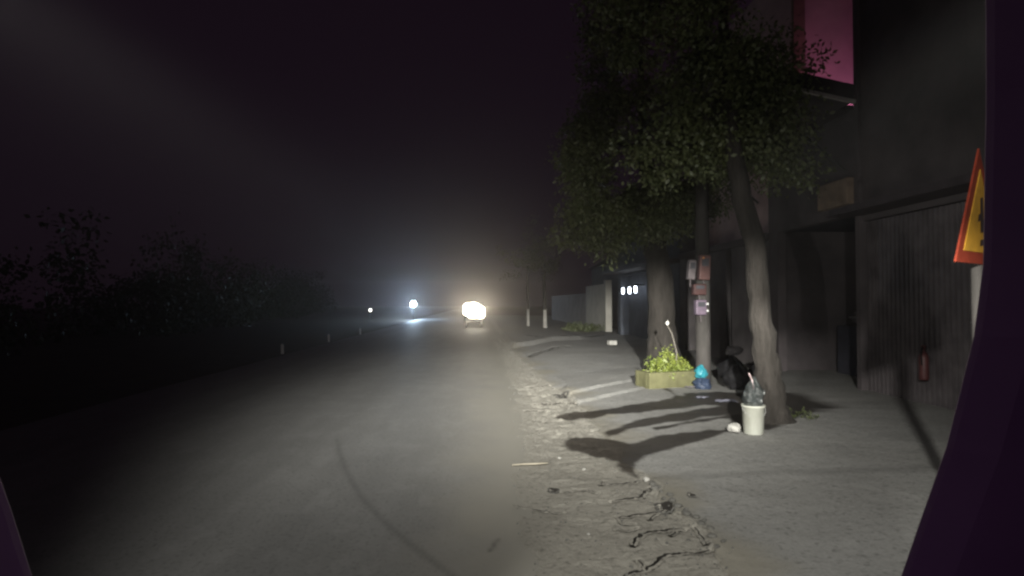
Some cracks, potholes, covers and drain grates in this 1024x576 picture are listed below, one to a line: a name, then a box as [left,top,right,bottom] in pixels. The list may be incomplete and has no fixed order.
crack [511,480,712,576]
